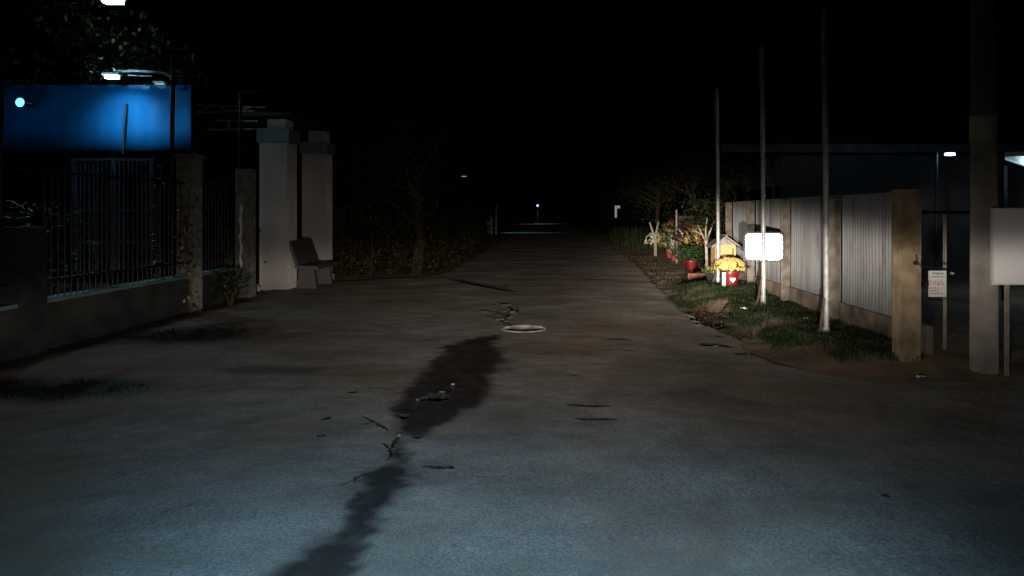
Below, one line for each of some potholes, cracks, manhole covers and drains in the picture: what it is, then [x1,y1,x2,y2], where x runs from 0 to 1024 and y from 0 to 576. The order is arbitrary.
crack [342,415,402,485]
manhole cover [501,325,546,333]
pothole [416,390,451,402]
crack [447,278,519,326]
